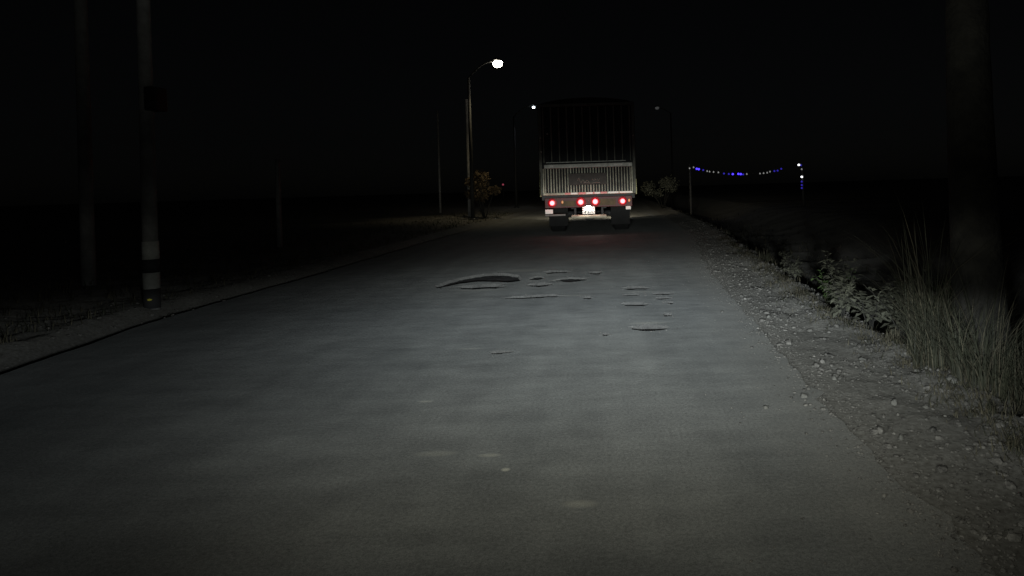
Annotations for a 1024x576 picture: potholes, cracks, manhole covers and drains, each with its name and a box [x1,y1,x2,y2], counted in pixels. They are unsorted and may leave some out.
pothole [435,273,521,288]
